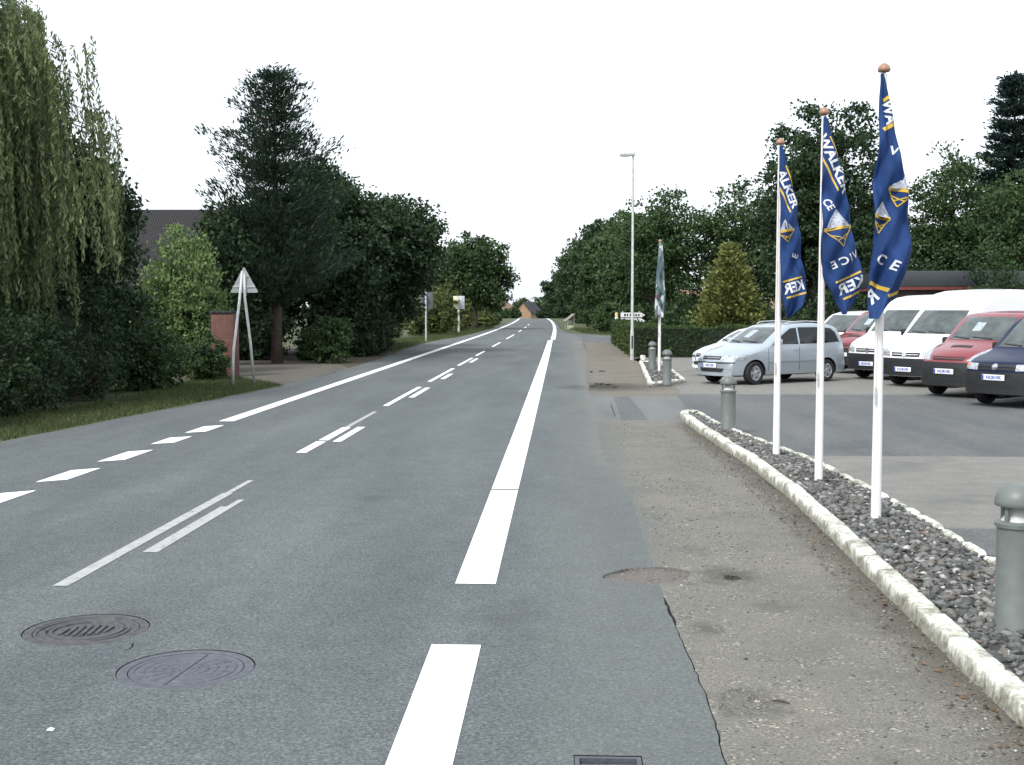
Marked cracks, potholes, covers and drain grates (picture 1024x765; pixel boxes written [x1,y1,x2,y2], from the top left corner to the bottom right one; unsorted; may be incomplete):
manhole cover [116,650,255,690]
manhole cover [22,615,149,646]
drain grate [574,756,642,765]
